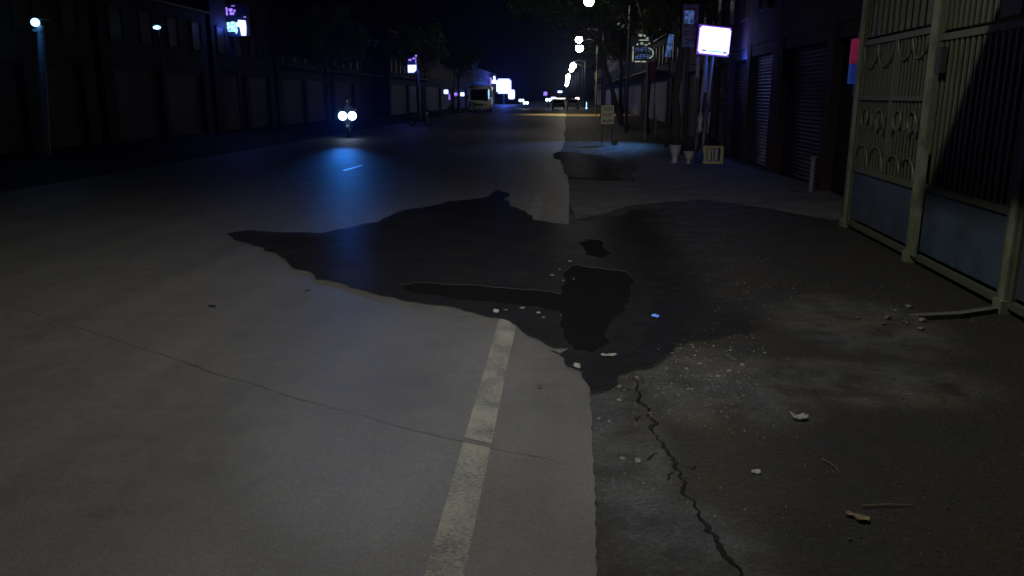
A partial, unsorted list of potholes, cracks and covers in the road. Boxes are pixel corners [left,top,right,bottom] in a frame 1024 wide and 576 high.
crack [632,374,743,576]
pothole [398,264,635,352]
